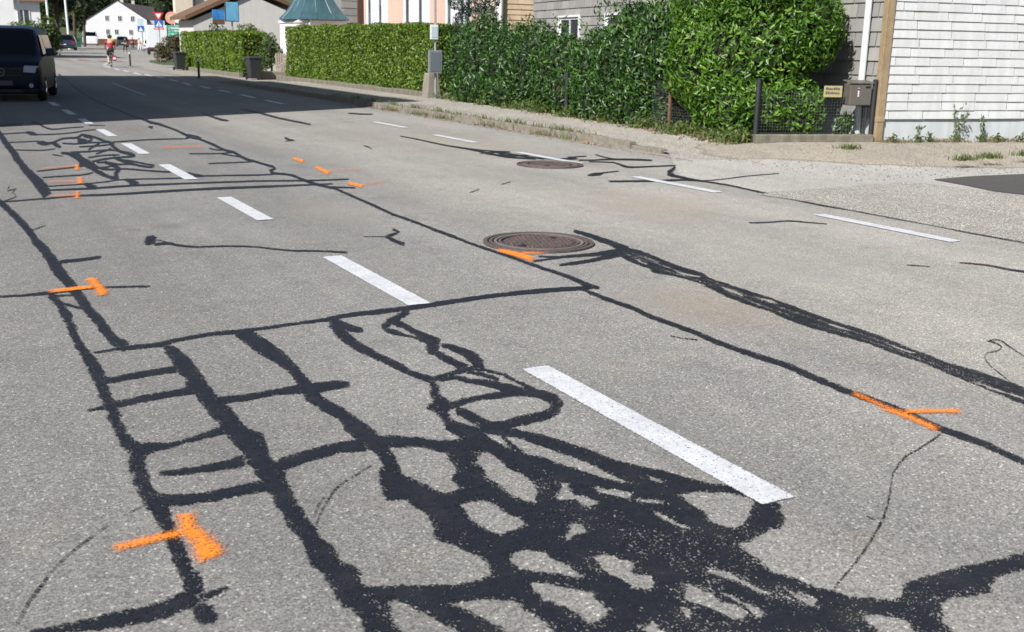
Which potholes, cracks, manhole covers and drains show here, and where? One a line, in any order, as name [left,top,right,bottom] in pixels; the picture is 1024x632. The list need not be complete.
manhole cover [517,160,583,169]
manhole cover [483,232,594,254]
crack [313,466,370,523]
crack [834,433,940,591]
crack [16,505,143,624]
